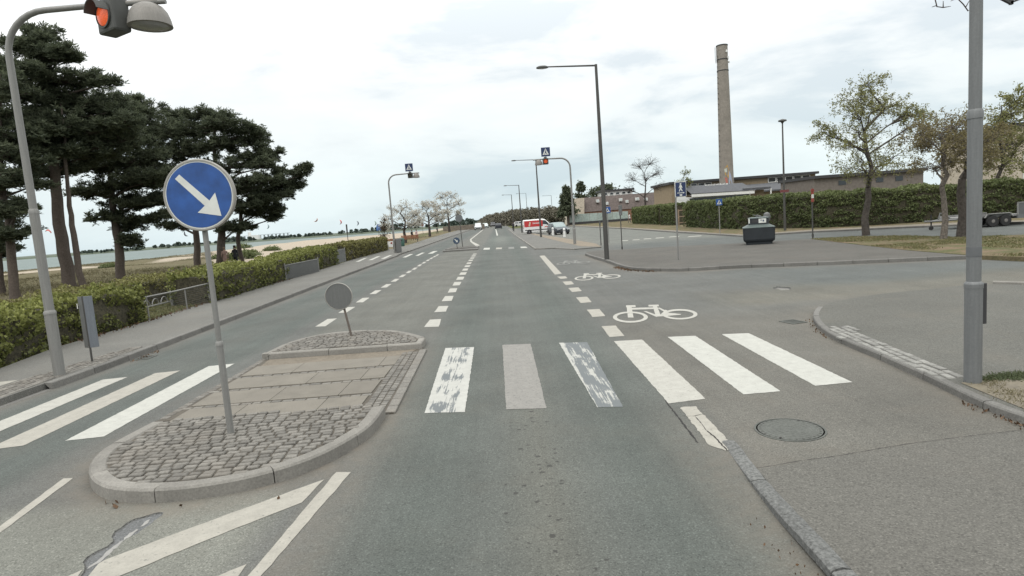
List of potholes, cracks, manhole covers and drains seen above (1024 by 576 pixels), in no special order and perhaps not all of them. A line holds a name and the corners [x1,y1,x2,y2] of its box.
manhole cover [754,418,827,442]
